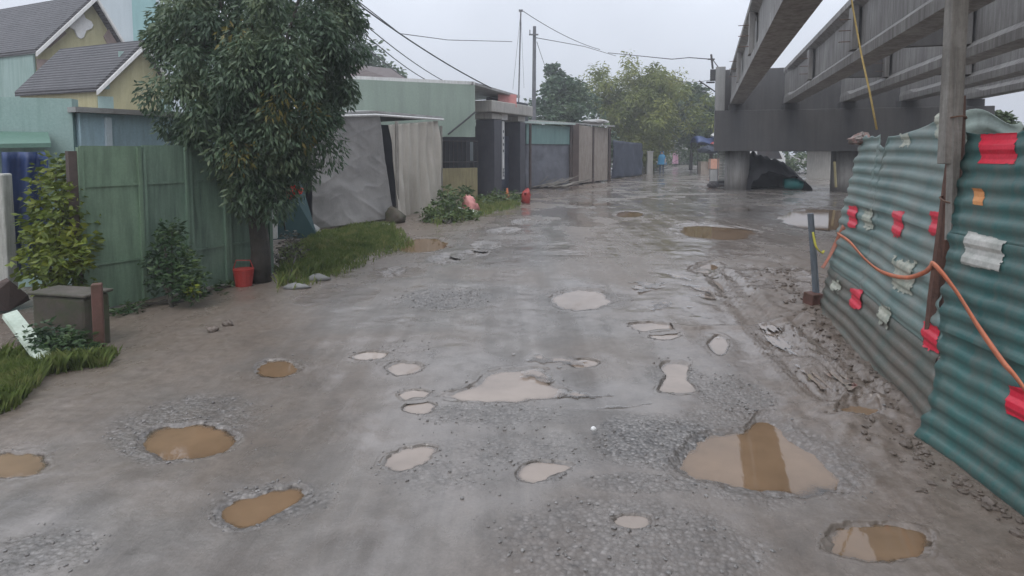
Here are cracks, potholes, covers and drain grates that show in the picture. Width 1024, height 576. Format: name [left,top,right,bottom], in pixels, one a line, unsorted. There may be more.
pothole [603,509,659,533]
pothole [388,236,462,255]
pothole [247,356,308,380]
pothole [621,319,681,335]
pothole [761,207,843,233]
pothole [509,456,582,486]
pothole [344,348,397,362]
pothole [395,397,443,416]
pothole [643,329,688,342]
pothole [660,222,773,242]
pothole [815,517,942,567]
pothole [541,285,623,313]
